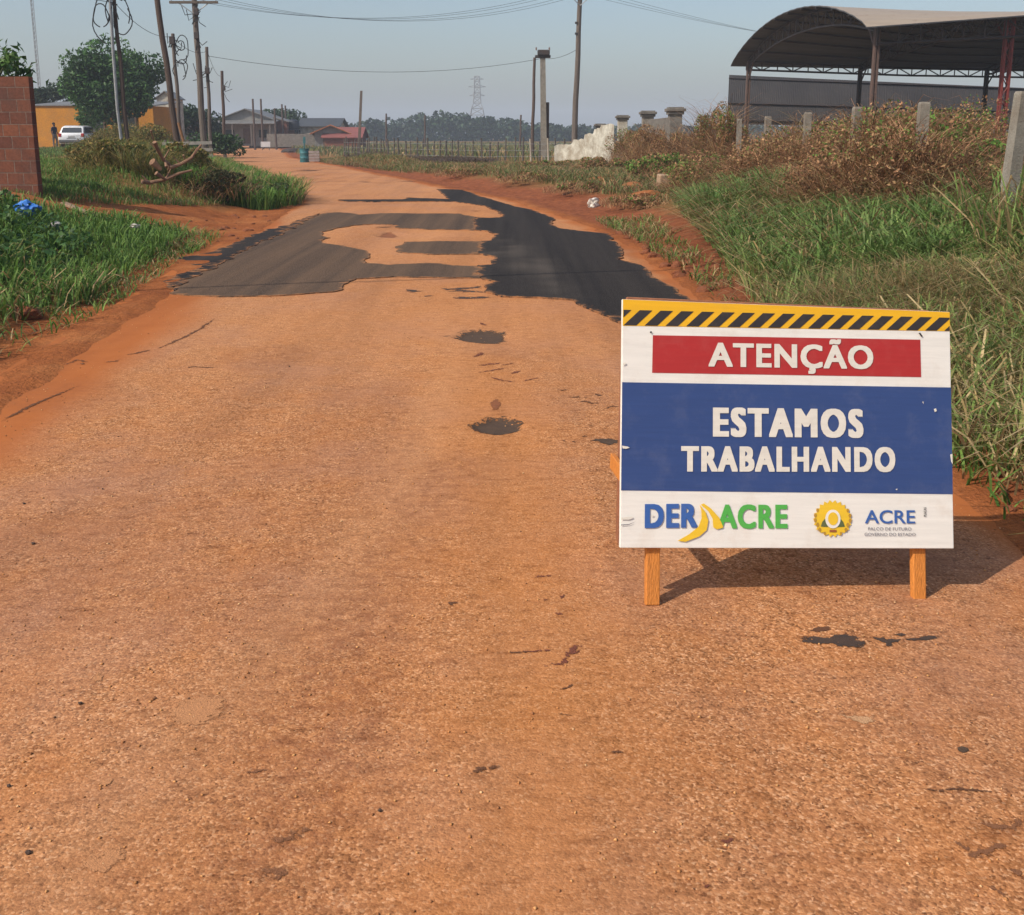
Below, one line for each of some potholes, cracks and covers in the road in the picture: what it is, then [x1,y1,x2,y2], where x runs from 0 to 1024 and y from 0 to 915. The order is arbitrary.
pothole [468,416,523,435]
crack [108,318,215,362]
crack [953,817,1024,899]
crack [509,637,582,666]
crack [6,386,77,418]
